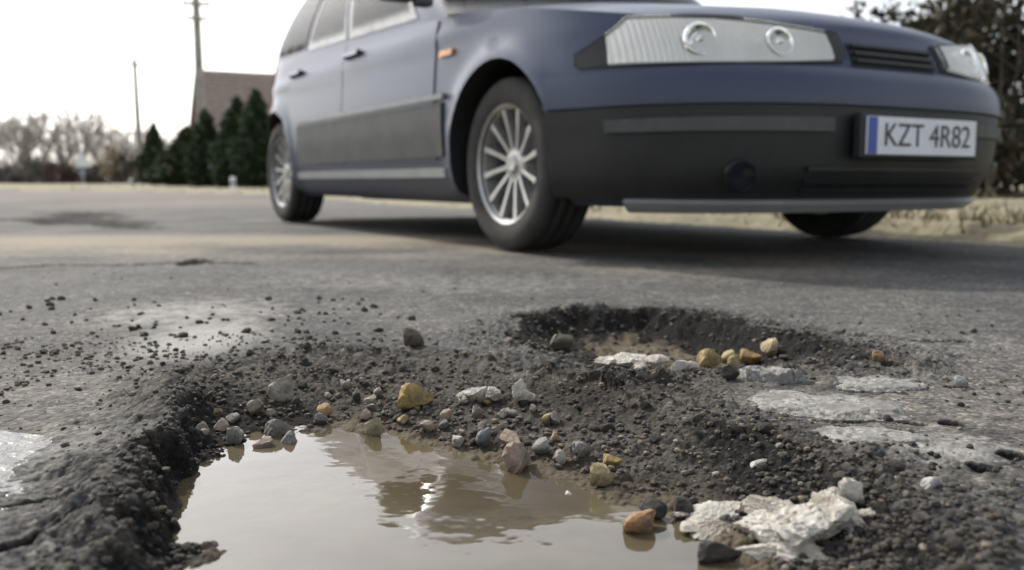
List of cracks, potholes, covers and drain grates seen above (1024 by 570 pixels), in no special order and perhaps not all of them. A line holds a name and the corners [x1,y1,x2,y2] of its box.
pothole [963,460,1002,474]
pothole [501,303,913,375]
pothole [84,346,979,570]
